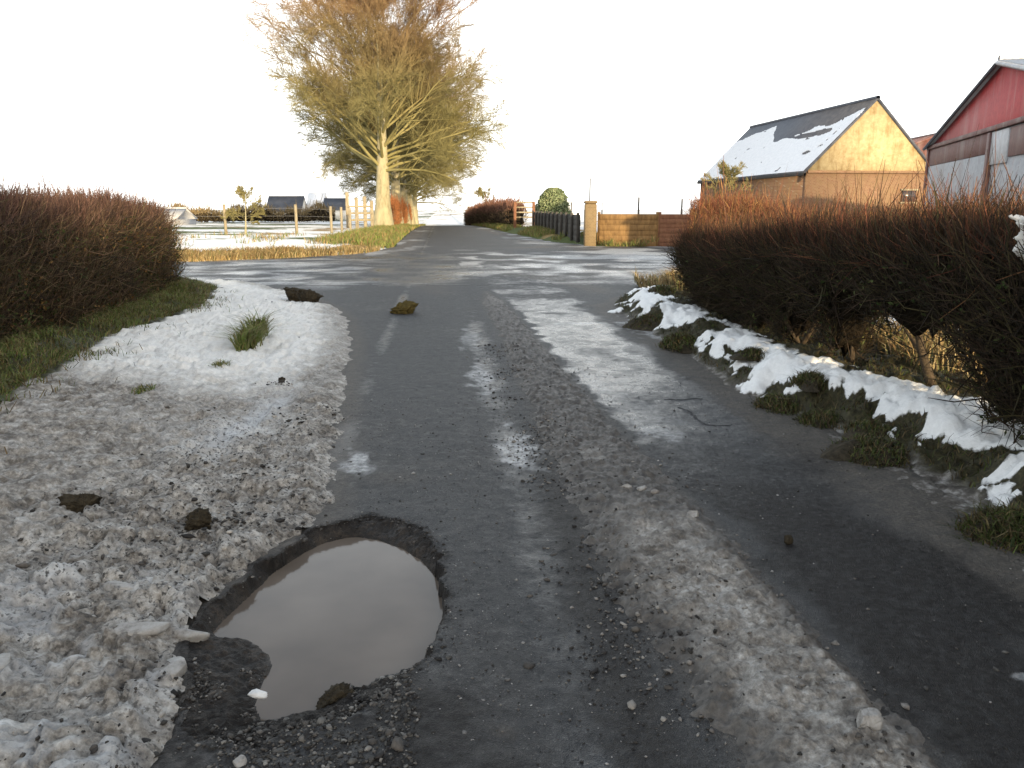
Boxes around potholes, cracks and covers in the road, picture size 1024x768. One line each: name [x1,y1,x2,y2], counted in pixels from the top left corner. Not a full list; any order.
pothole [172,513,456,753]
crack [664,398,732,426]
